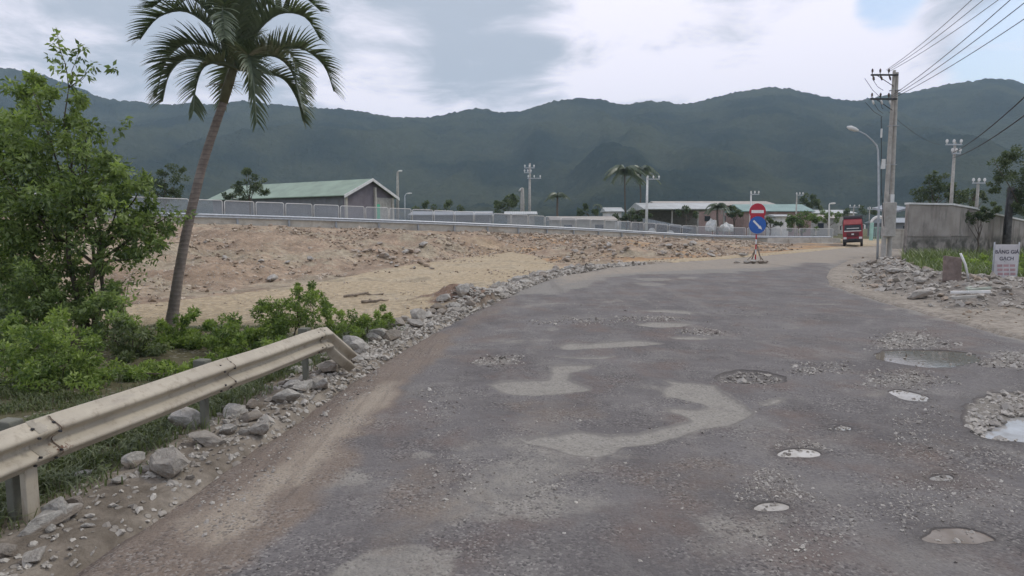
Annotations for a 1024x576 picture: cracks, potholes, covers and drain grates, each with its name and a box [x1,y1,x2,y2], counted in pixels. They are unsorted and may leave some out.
pothole [753,501,790,511]
pothole [888,389,930,402]
pothole [960,389,1024,443]
pothole [776,448,822,458]
pothole [920,527,996,544]
pothole [874,349,982,368]
pothole [714,369,787,384]
